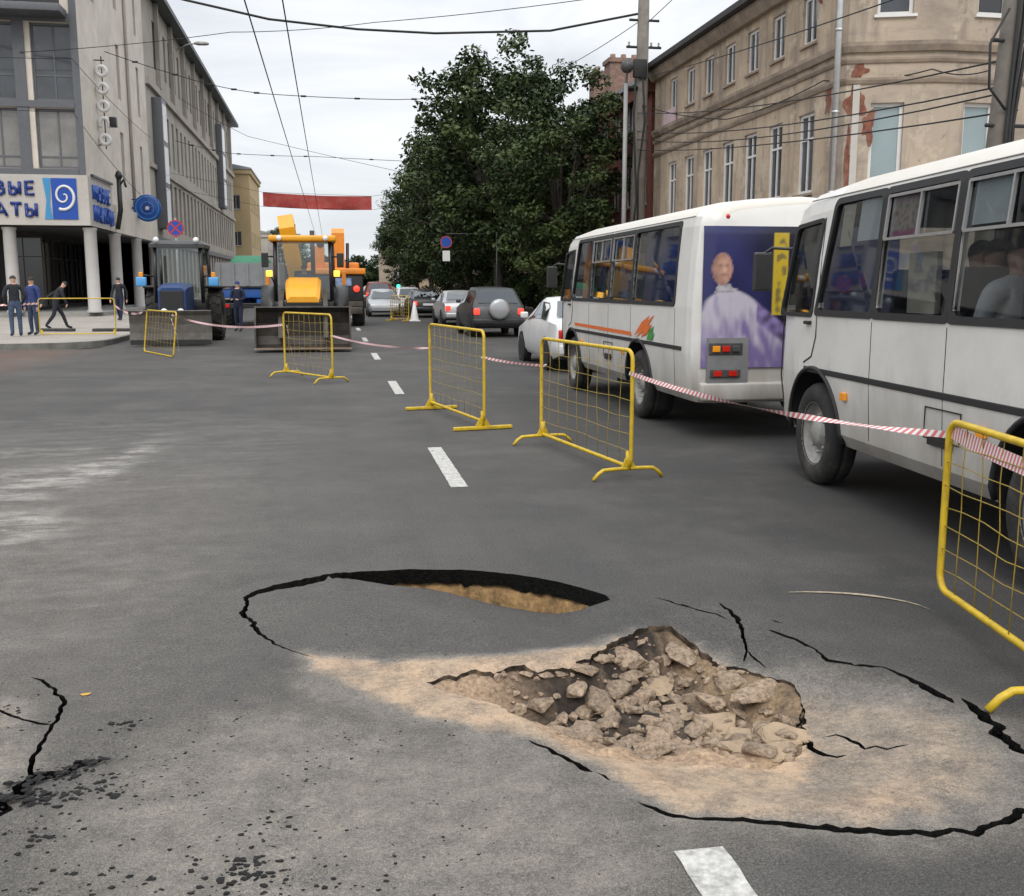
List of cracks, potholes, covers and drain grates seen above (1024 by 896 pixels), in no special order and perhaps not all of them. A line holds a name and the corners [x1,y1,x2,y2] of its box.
crack [239,572,349,657]
crack [529,740,611,781]
crack [0,677,107,816]
crack [656,597,1024,754]
crack [637,801,1024,838]
pothole [427,625,808,772]
